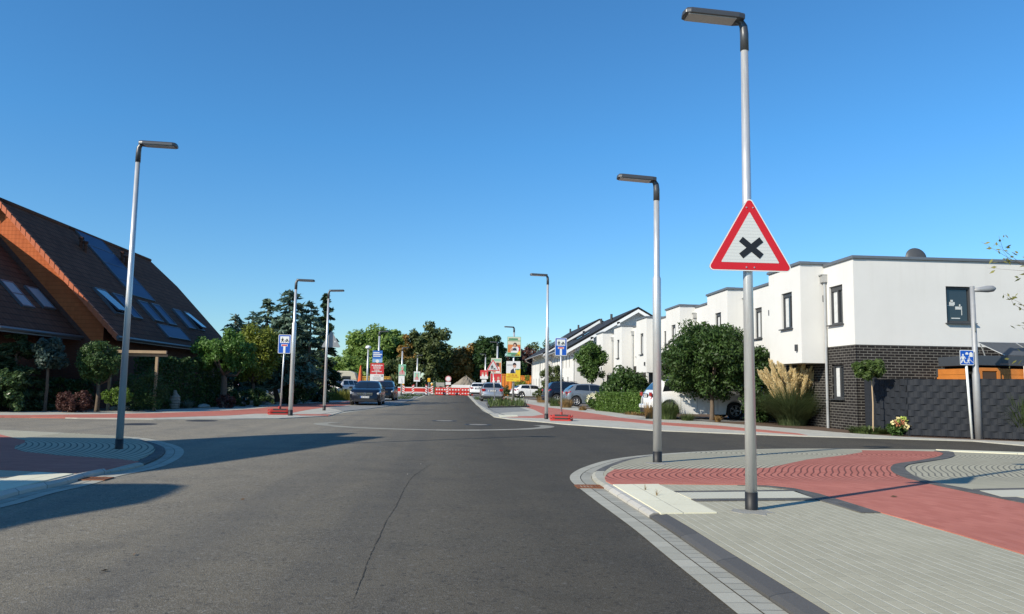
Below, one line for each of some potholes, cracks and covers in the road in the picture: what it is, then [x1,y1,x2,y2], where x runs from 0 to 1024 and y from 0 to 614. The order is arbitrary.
crack [353,459,436,599]
